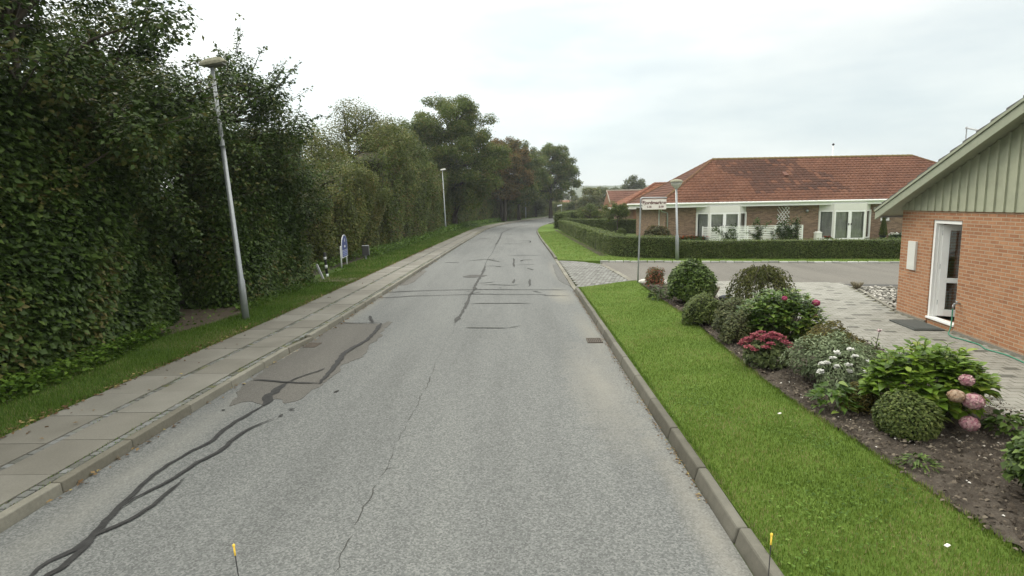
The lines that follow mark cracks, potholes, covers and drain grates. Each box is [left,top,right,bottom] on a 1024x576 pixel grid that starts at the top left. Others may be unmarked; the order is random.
crack [335,225,570,572]
